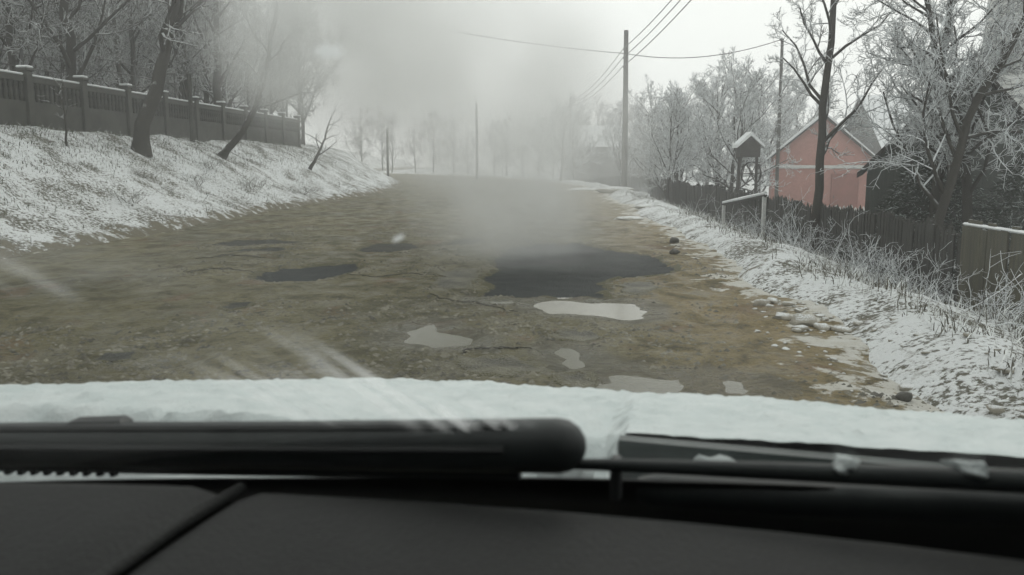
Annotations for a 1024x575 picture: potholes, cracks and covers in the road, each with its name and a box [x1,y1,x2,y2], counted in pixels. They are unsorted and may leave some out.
crack [462,346,532,354]
crack [350,273,518,312]
